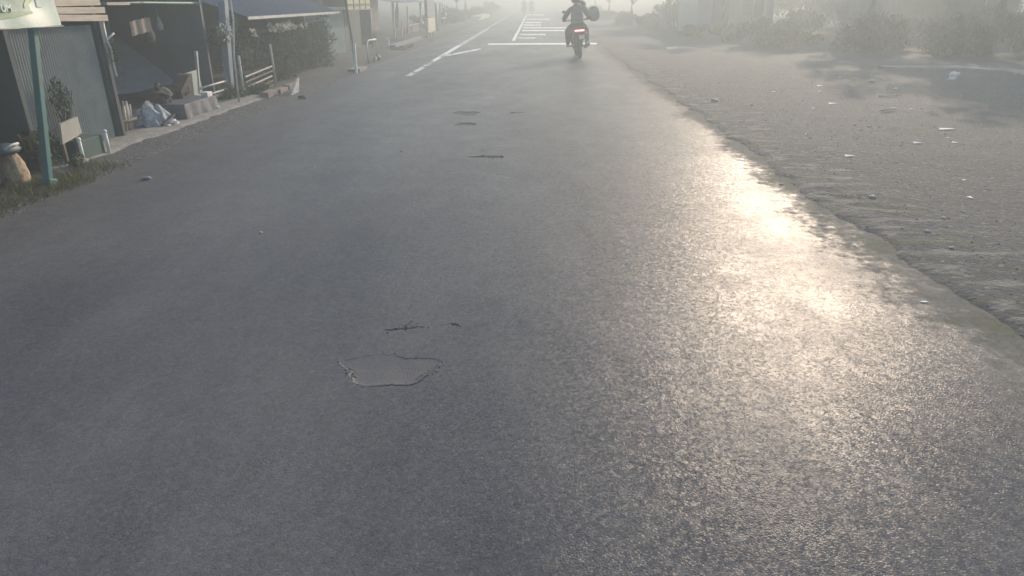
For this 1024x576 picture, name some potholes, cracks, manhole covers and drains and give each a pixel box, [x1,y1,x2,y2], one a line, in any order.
pothole [337,351,444,387]
crack [384,321,429,333]
